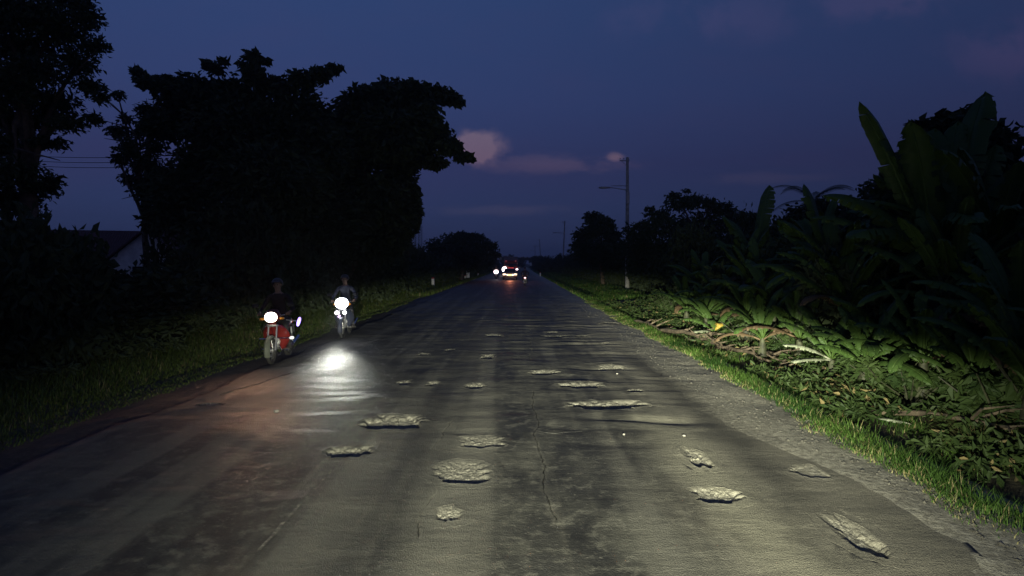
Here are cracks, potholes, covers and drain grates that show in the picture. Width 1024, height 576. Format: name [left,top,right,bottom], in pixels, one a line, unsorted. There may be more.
pothole [387,378,420,387]
crack [524,389,581,530]
pothole [311,440,387,462]
pothole [419,455,504,489]
pothole [546,380,613,390]
pothole [555,398,660,412]
pothole [804,507,906,569]
pothole [448,432,517,453]
pothole [671,443,724,473]
pothole [774,461,845,483]
pothole [419,380,447,388]
